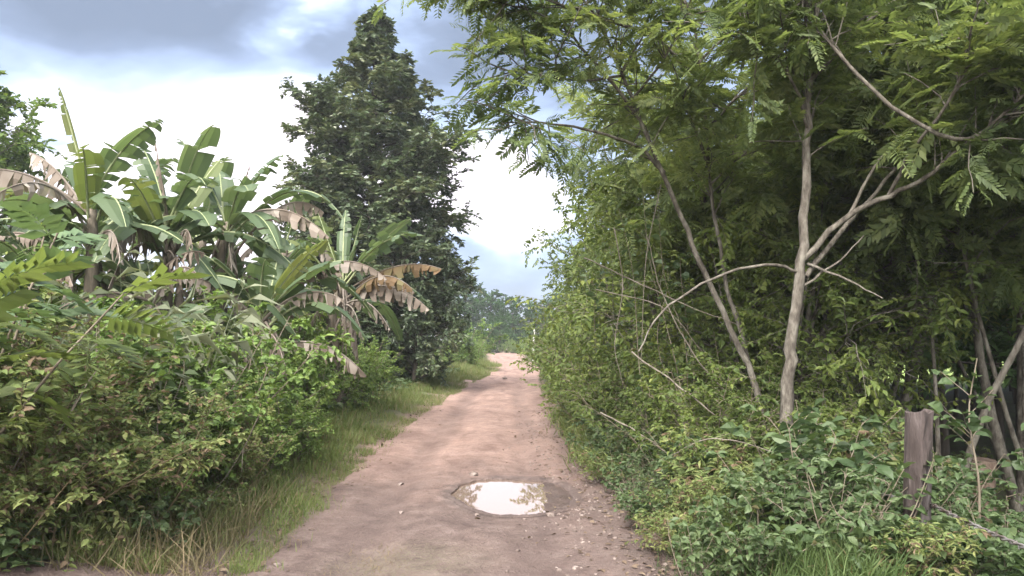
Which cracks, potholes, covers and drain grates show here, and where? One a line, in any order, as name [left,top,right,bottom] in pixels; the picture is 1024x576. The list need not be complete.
pothole [441,475,583,518]
